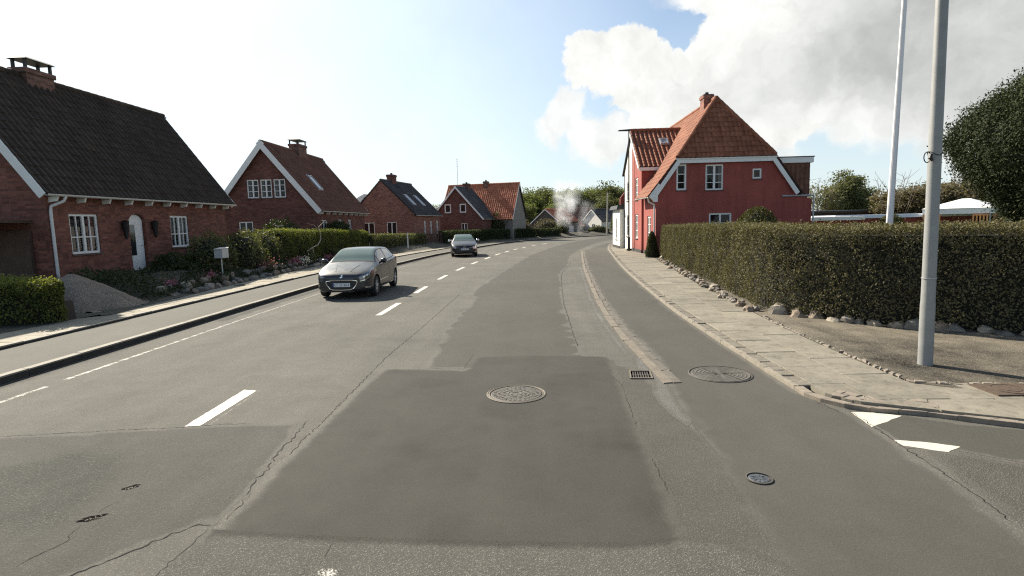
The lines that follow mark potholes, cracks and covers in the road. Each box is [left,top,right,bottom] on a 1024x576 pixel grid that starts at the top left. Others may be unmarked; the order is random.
manhole cover [745,472,773,485]
pothole [78,513,109,522]
drain grate [629,370,653,379]
crack [69,523,220,576]
manhole cover [688,366,753,383]
manhole cover [487,385,546,404]
crack [248,423,305,492]
